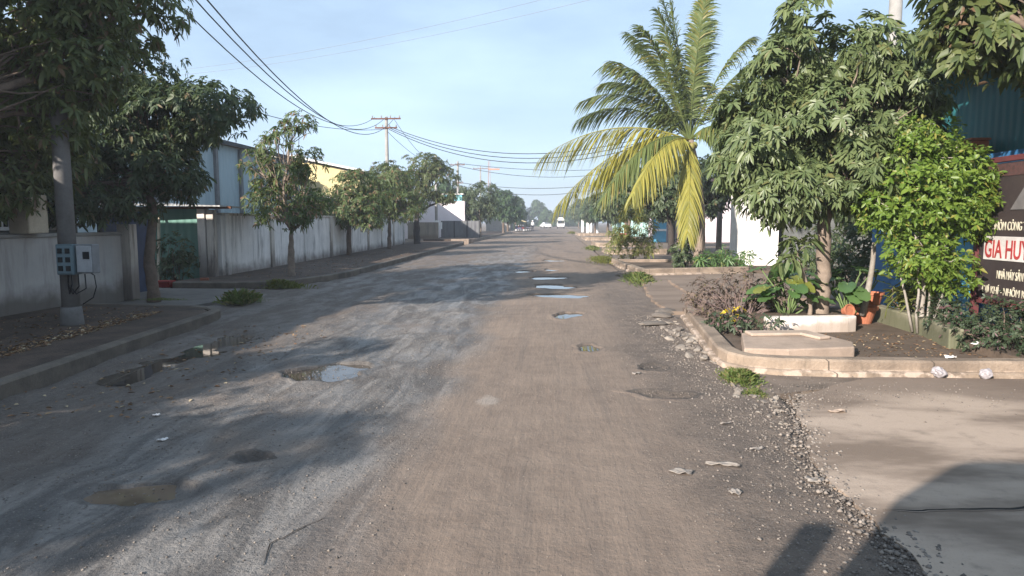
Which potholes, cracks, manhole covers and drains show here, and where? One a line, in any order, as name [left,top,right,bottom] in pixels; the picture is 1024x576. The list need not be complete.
pothole [571,342,610,355]
pothole [547,311,591,321]
pothole [270,360,383,384]
pothole [631,360,677,374]
pothole [214,445,291,470]
pothole [611,387,718,402]
crack [263,518,324,565]
